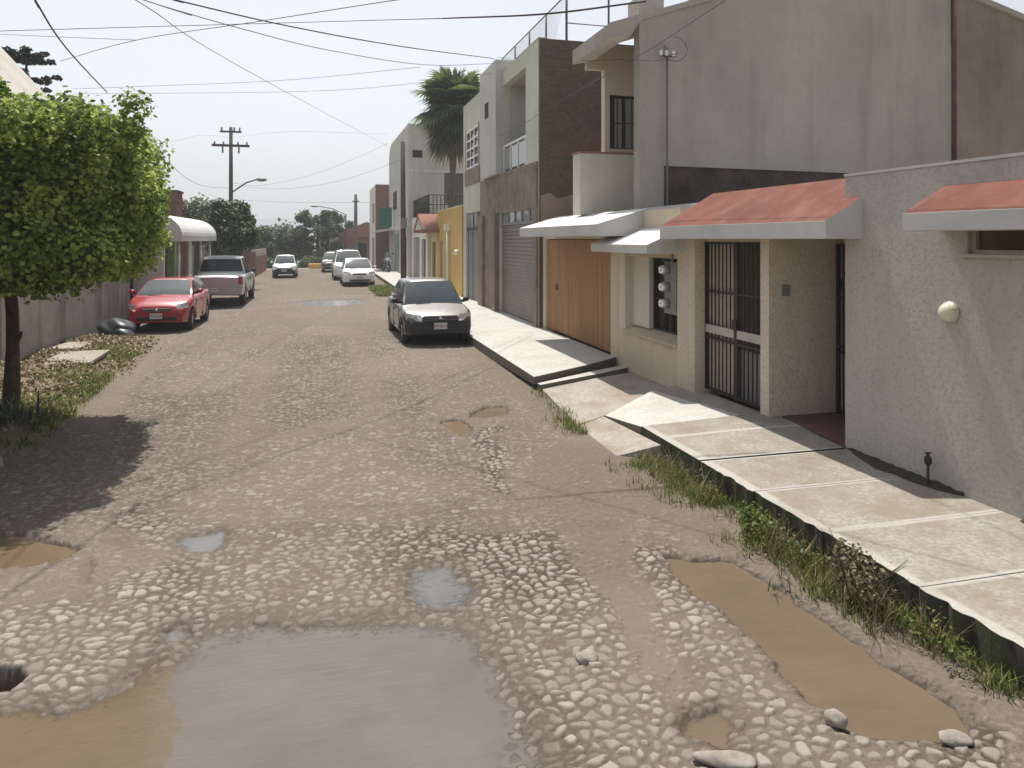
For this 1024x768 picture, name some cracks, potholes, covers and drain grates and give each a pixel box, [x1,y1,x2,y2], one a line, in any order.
pothole [0,640,184,768]
pothole [644,546,1003,763]
pothole [161,598,577,768]
pothole [428,416,483,438]
pothole [283,298,373,307]
pothole [460,403,518,420]
pothole [0,522,102,576]
pothole [382,550,498,609]
